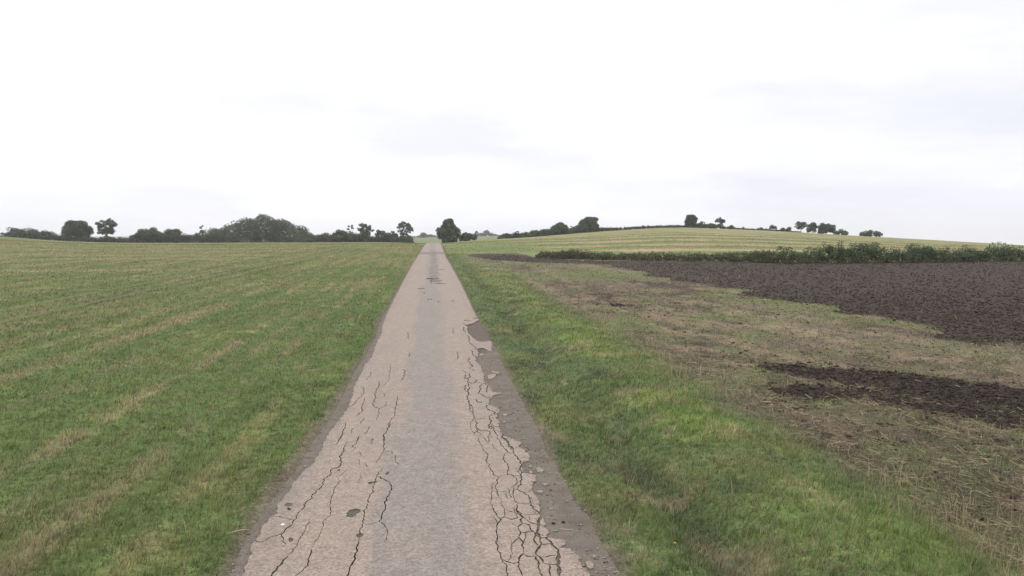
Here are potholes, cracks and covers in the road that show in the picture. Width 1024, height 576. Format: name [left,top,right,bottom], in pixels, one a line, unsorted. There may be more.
crack [457,323,562,576]
crack [256,333,411,576]
